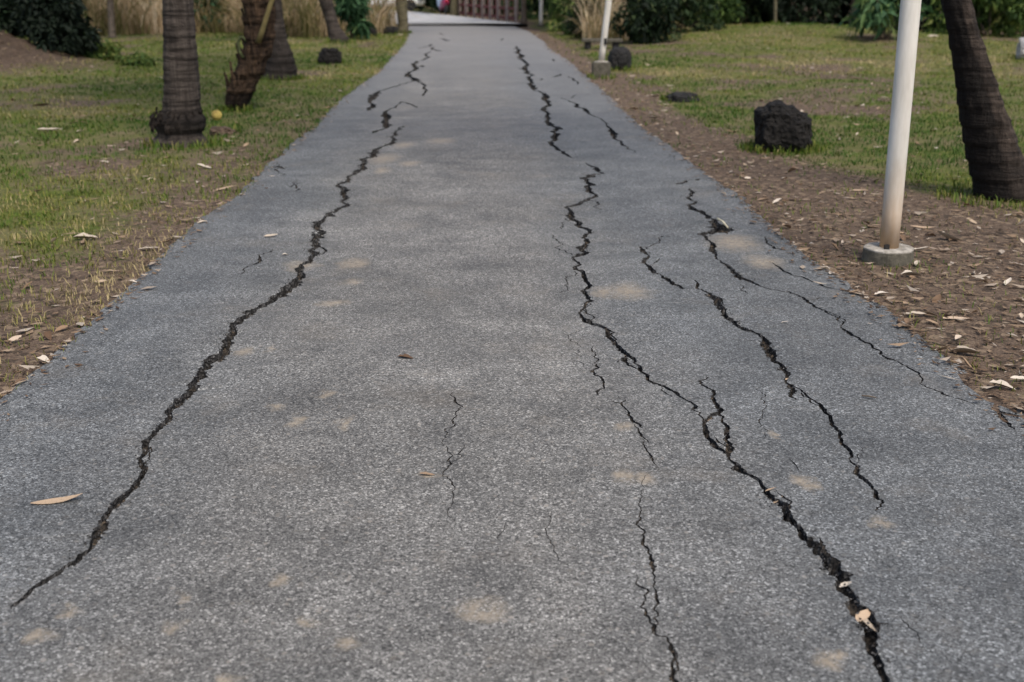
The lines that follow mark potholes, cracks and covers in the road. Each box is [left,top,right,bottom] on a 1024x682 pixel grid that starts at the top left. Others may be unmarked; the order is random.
crack [10,33,449,609]
crack [442,392,465,521]
crack [501,38,975,682]
